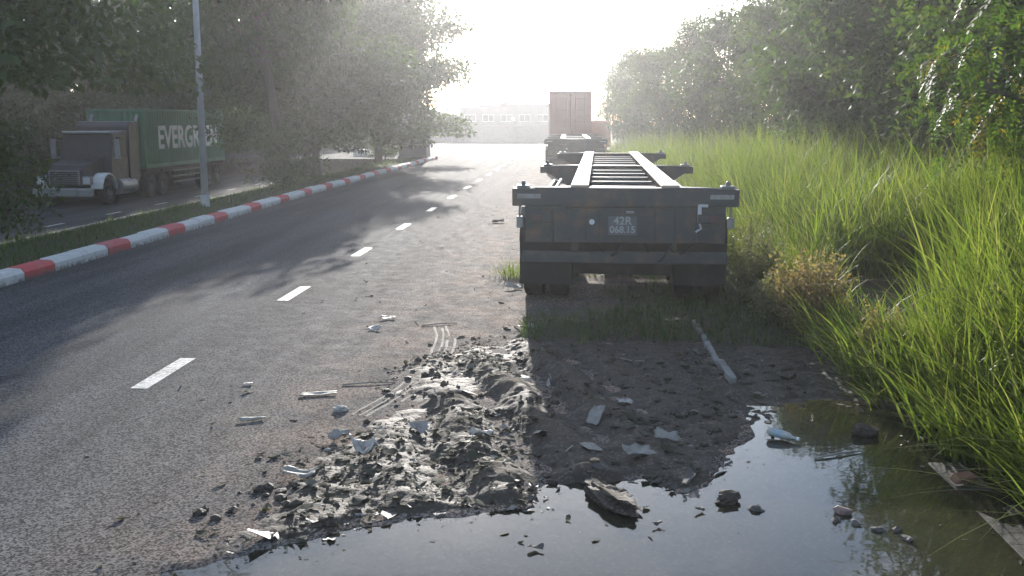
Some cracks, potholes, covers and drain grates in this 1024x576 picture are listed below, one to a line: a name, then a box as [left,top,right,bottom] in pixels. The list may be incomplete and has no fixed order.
pothole [298,441,731,537]
